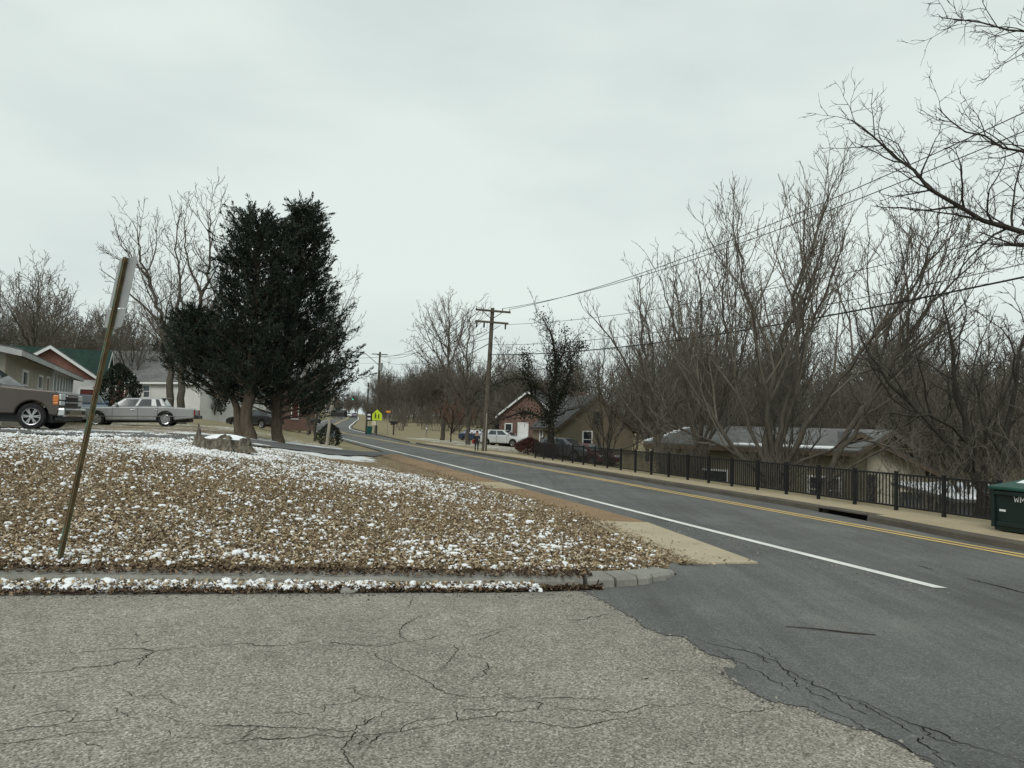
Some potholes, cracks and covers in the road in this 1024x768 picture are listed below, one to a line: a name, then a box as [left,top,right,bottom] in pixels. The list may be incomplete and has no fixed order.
drain grate [817,506,884,521]
crack [8,600,442,690]
crack [213,625,780,768]
crack [696,639,1023,767]
crack [0,690,190,747]
